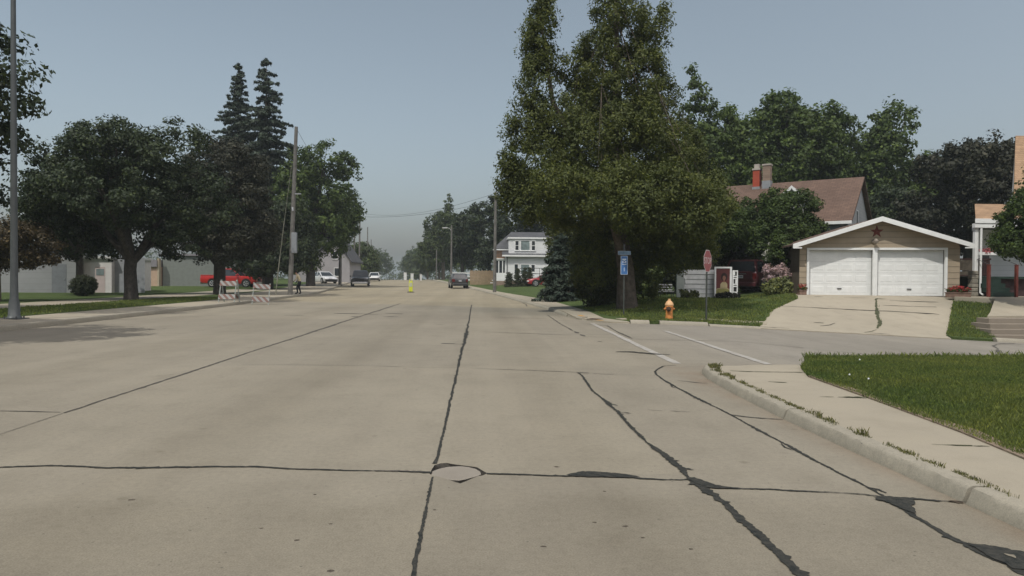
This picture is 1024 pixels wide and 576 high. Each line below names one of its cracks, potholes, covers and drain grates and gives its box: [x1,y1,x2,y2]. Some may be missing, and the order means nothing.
crack [487,471,688,480]
pothole [430,463,487,483]
